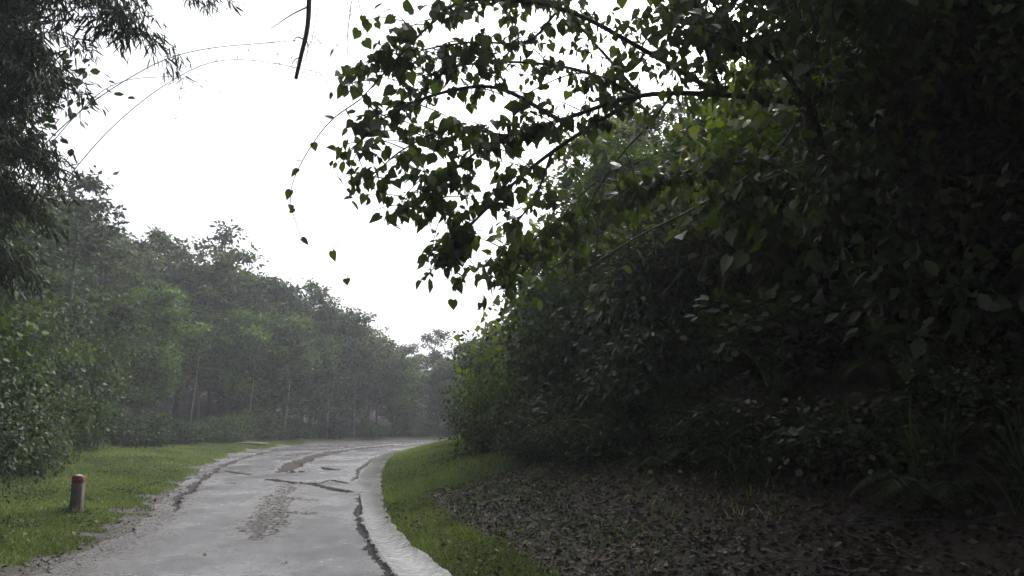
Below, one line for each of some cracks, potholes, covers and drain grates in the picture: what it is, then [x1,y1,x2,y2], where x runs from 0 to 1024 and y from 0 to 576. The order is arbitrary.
crack [171,444,414,540]
